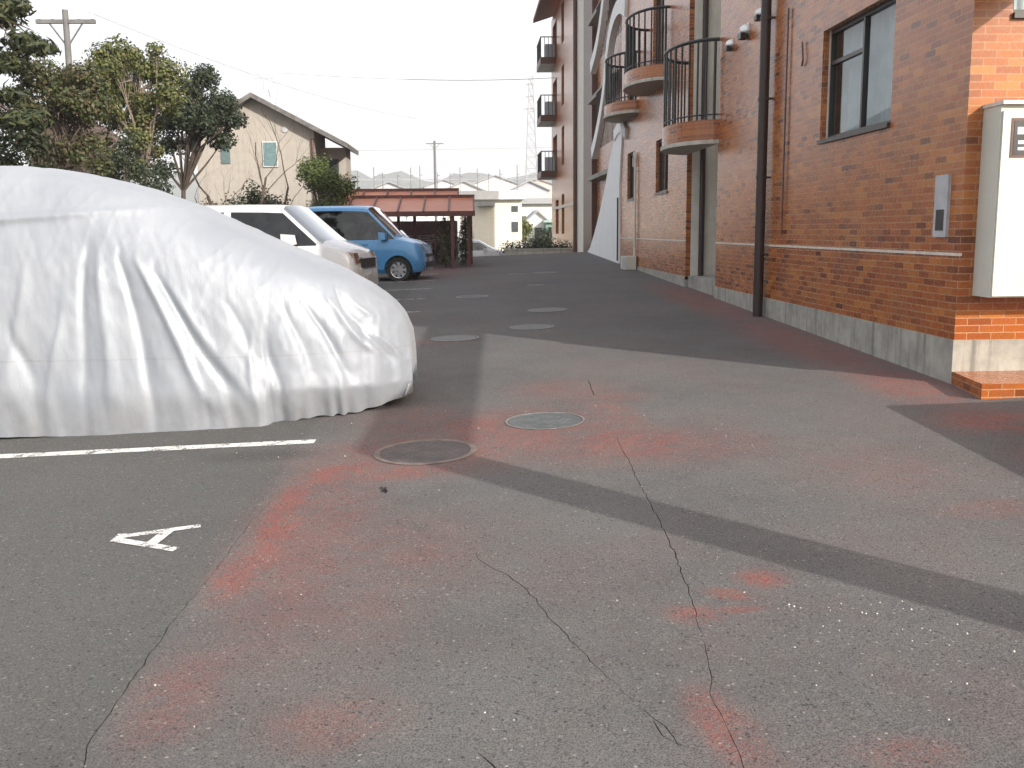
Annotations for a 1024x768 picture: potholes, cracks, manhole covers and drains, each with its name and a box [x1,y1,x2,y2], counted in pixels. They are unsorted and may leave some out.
crack [617,439,744,768]
manhole cover [373,439,477,465]
manhole cover [505,412,585,430]
